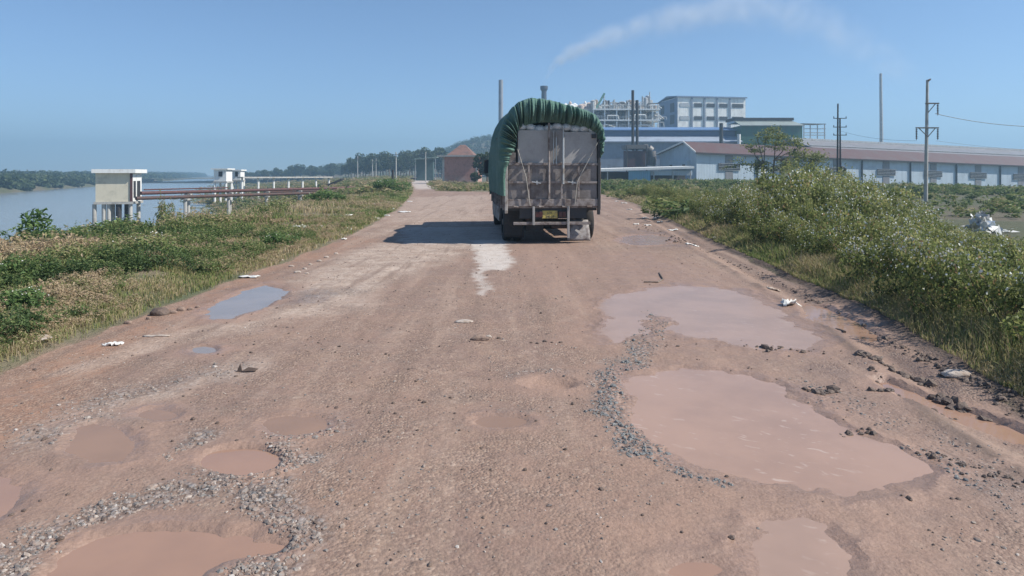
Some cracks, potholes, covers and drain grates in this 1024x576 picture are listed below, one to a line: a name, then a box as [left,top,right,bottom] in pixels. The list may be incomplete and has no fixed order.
pothole [584,355,1001,504]
pothole [51,418,151,465]
pothole [614,234,675,245]
pothole [194,281,295,320]
pothole [146,432,323,497]
pothole [465,411,536,430]
pothole [251,411,345,444]
pothole [506,368,596,390]
pothole [720,507,877,576]
pothole [0,464,42,521]
pothole [128,405,187,422]
pothole [652,555,746,576]
